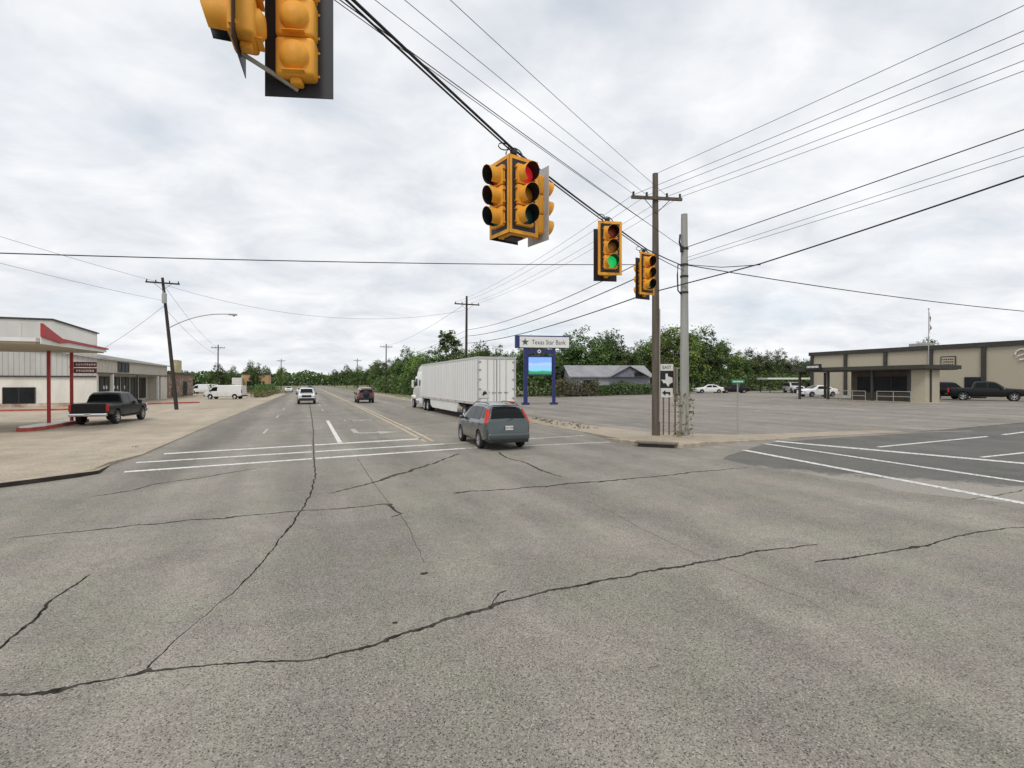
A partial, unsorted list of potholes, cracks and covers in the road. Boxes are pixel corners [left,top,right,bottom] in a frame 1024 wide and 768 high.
crack [456,452,834,616]
crack [0,574,90,649]
crack [14,403,458,669]
crack [815,527,1024,562]
